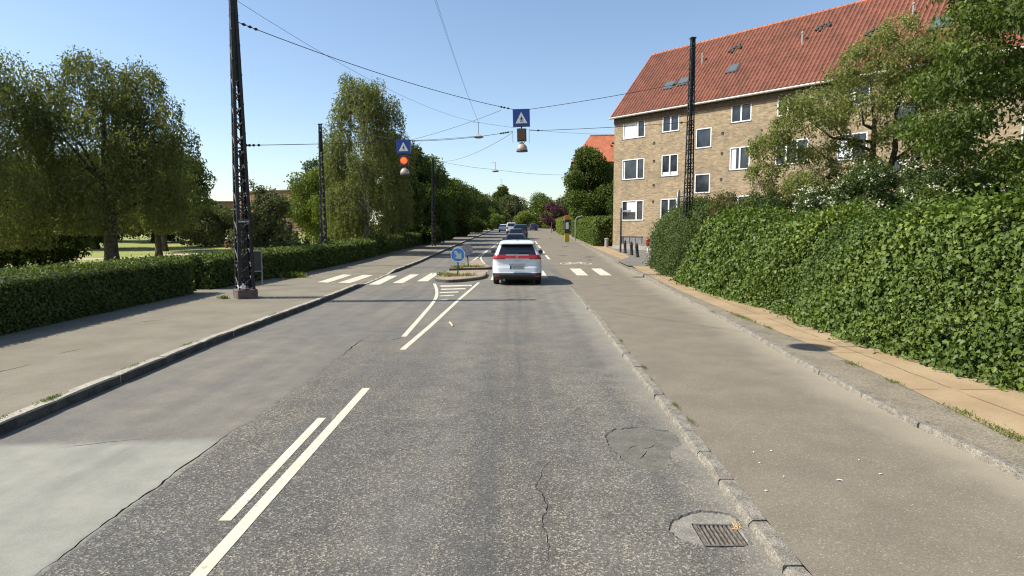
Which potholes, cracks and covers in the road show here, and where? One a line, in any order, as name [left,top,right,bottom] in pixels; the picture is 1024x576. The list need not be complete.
crack [536,461,555,571]
drain grate [692,524,748,548]
